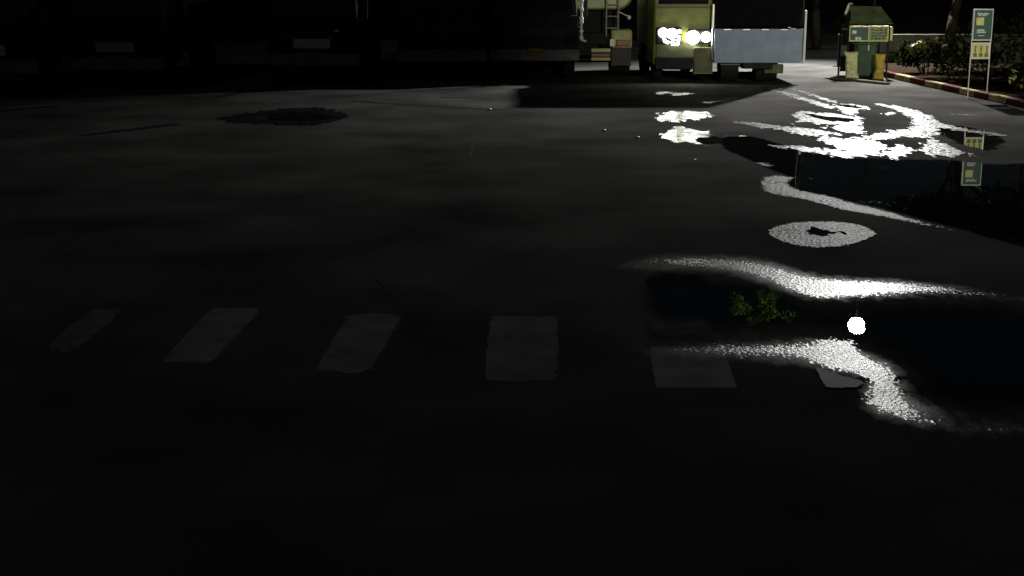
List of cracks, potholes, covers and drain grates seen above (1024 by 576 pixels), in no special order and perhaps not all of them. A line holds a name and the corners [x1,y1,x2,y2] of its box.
crack [368,271,403,378]
pothole [218,107,348,126]
